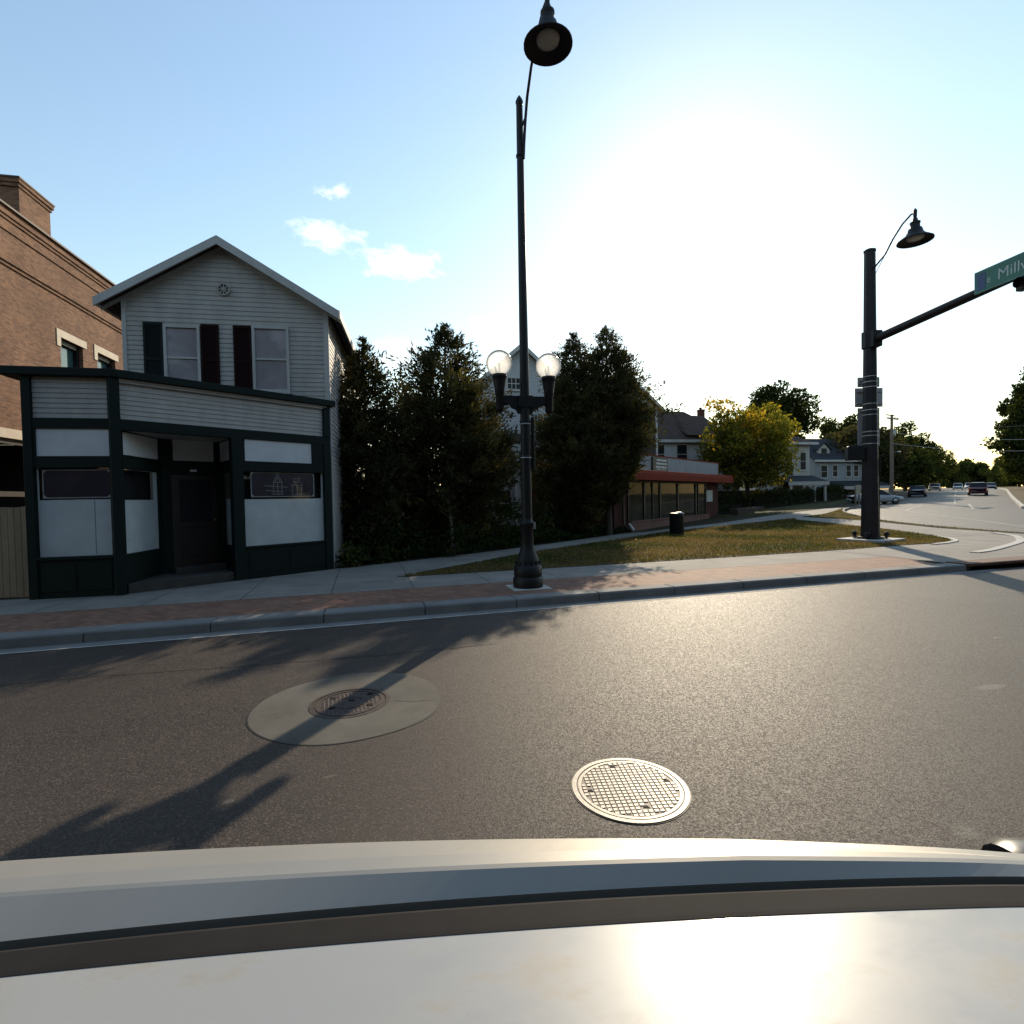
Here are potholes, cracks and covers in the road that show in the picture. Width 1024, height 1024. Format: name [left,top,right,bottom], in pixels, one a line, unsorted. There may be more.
manhole cover [246,672,441,746]
manhole cover [571,758,692,825]
